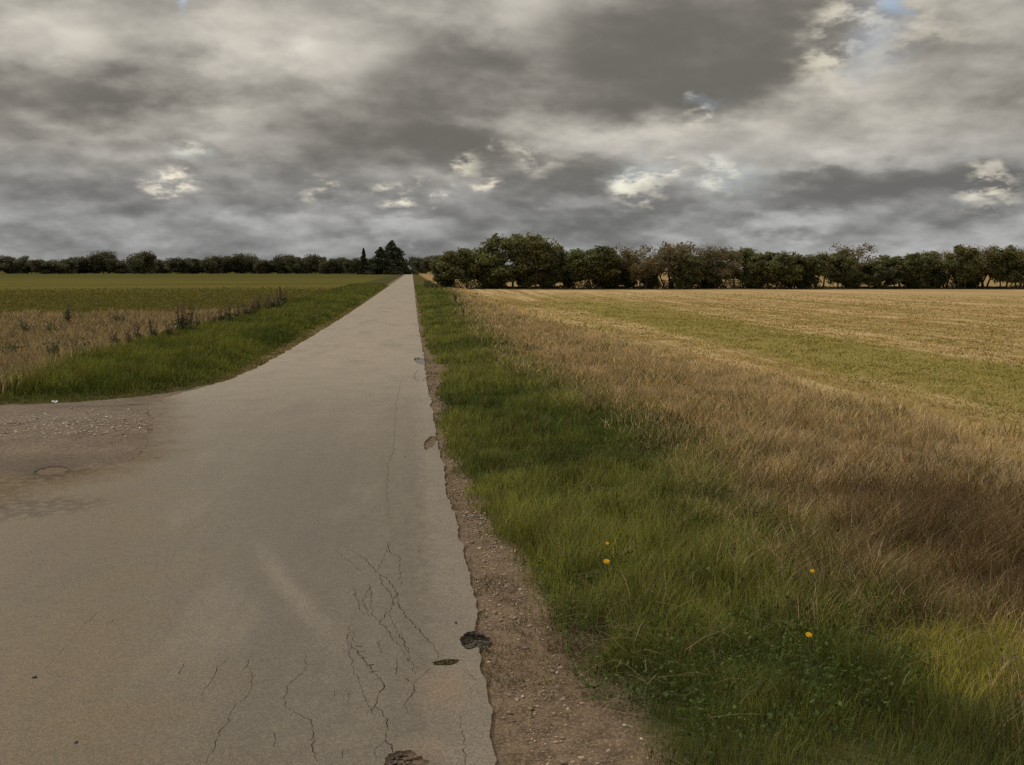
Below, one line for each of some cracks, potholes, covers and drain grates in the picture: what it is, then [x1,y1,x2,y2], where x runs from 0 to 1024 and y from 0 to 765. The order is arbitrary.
crack [333,541,439,756]
pothole [384,750,429,765]
pothole [459,631,492,652]
pothole [423,436,437,451]
